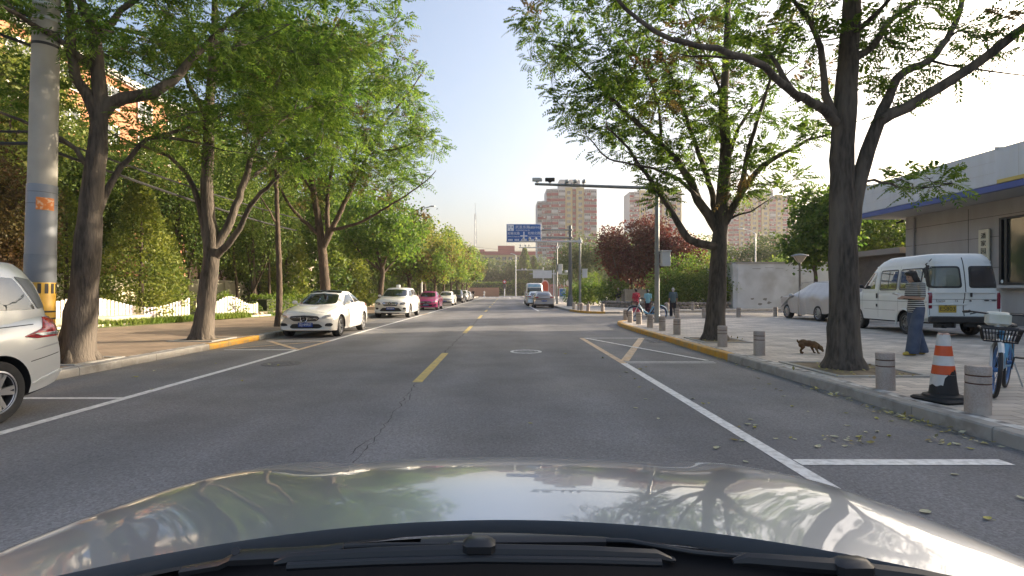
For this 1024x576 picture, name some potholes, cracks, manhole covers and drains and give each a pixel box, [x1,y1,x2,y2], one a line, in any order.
crack [349,383,416,463]
